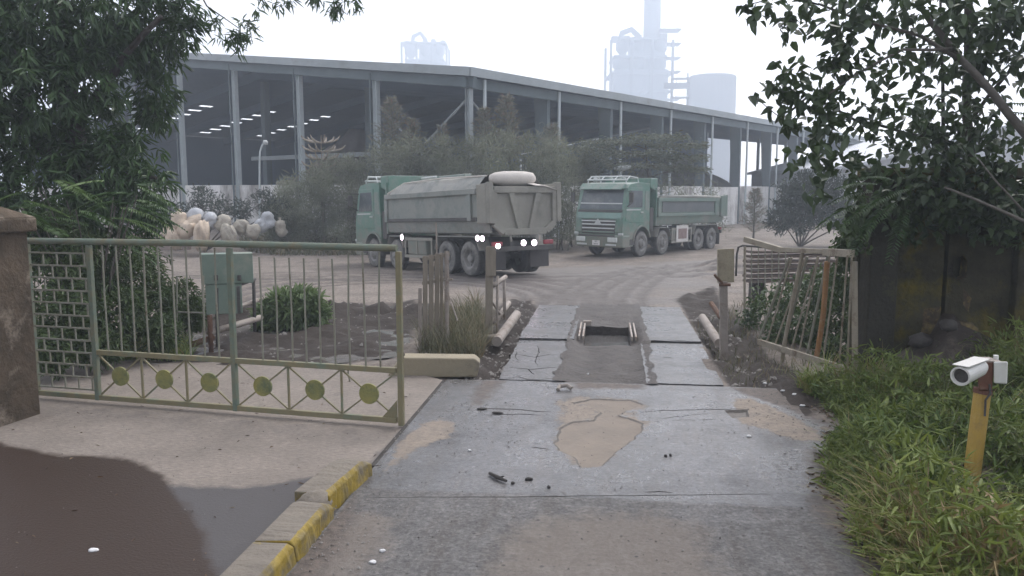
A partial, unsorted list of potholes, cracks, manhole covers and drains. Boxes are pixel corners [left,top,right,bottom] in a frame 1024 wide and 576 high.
crack [644,409,728,420]
crack [509,346,554,381]
